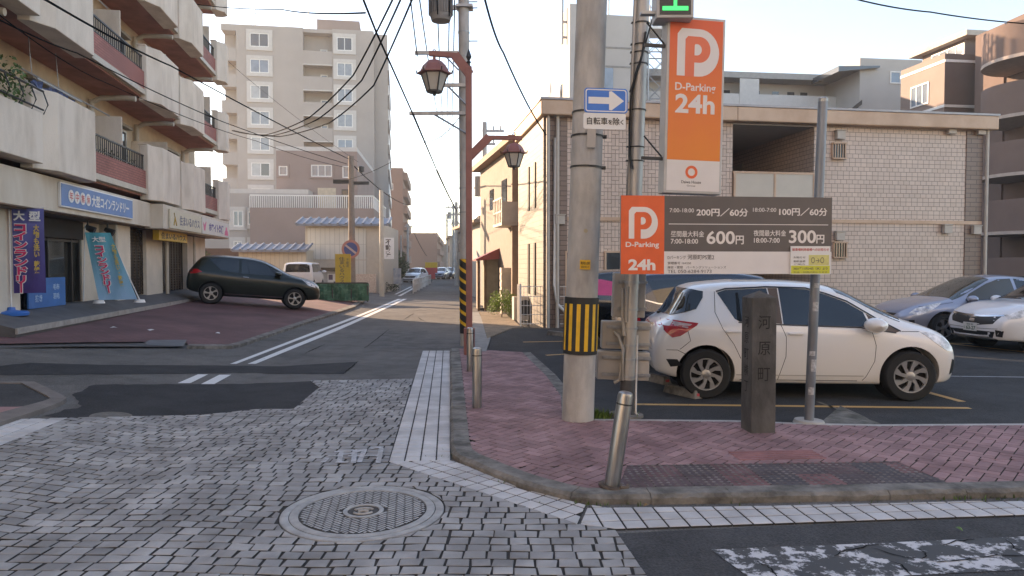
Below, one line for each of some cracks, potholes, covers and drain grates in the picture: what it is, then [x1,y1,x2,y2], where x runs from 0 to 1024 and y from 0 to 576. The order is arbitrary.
manhole cover [279,486,444,543]
